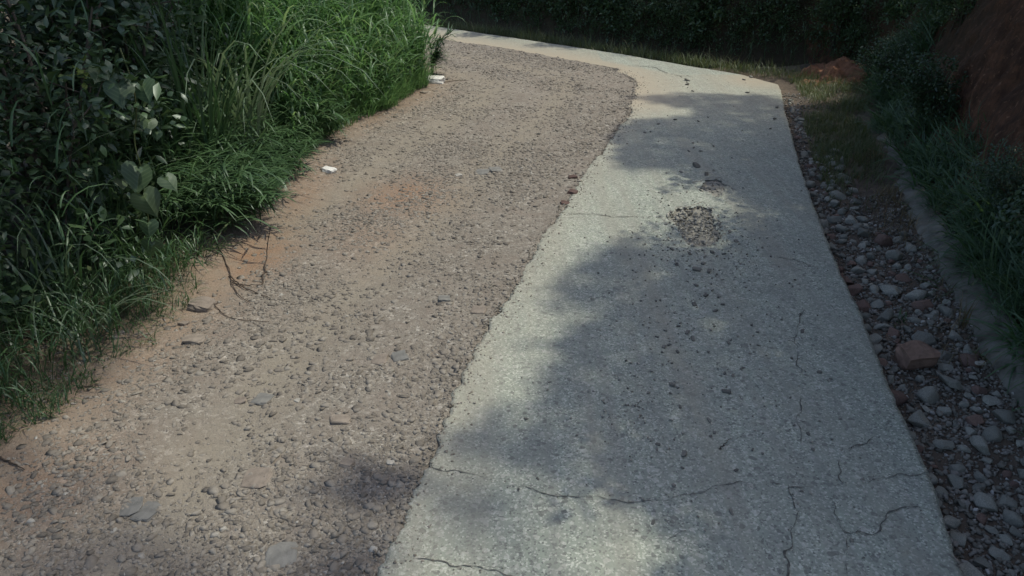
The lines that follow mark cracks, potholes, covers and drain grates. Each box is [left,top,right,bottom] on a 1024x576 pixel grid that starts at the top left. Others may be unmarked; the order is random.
pothole [659,200,730,252]
crack [362,557,518,576]
pothole [687,176,741,202]
crack [411,308,939,576]
